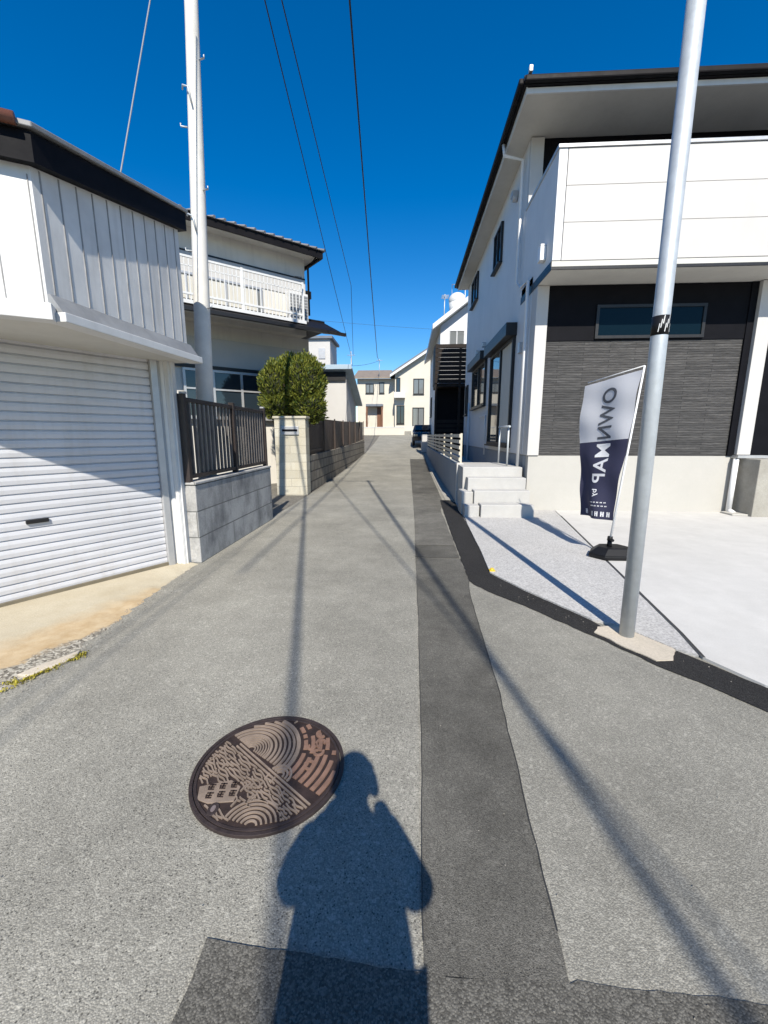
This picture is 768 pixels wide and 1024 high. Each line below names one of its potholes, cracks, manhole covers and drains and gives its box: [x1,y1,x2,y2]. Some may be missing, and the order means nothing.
manhole cover [188,716,344,839]
